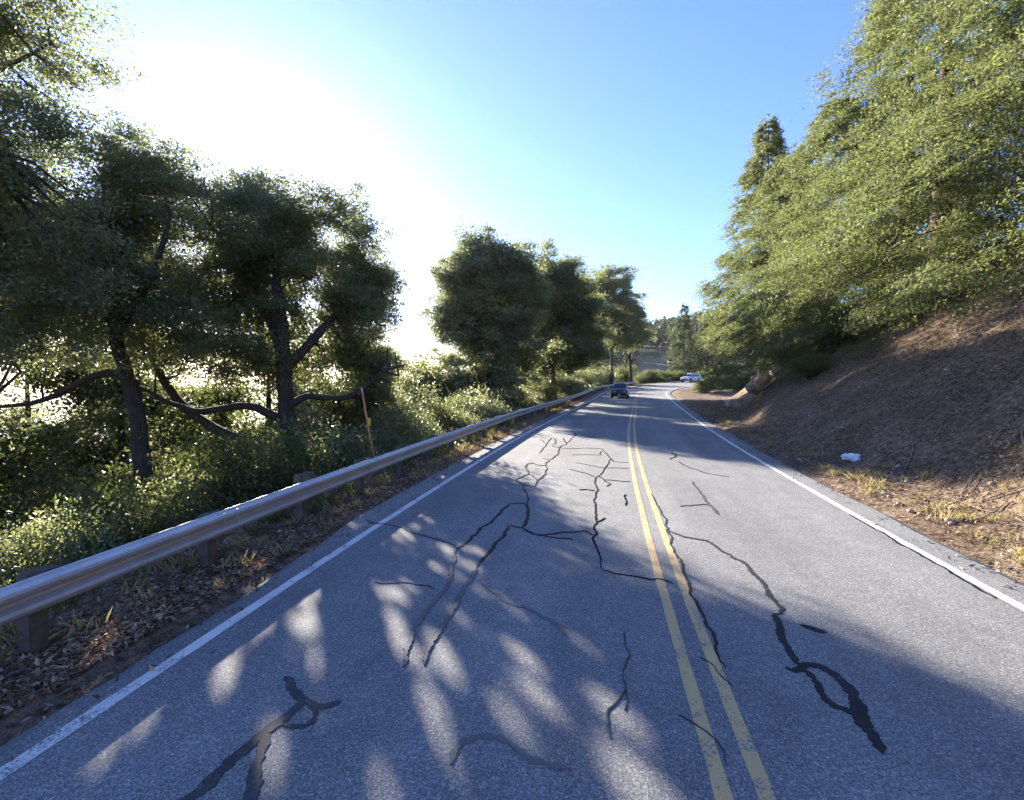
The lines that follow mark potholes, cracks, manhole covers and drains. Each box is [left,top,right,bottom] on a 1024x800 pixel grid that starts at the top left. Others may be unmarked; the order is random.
crack [678,714,727,764]
crack [540,430,730,584]
crack [374,581,434,589]
crack [700,657,733,686]
crack [606,631,630,738]
